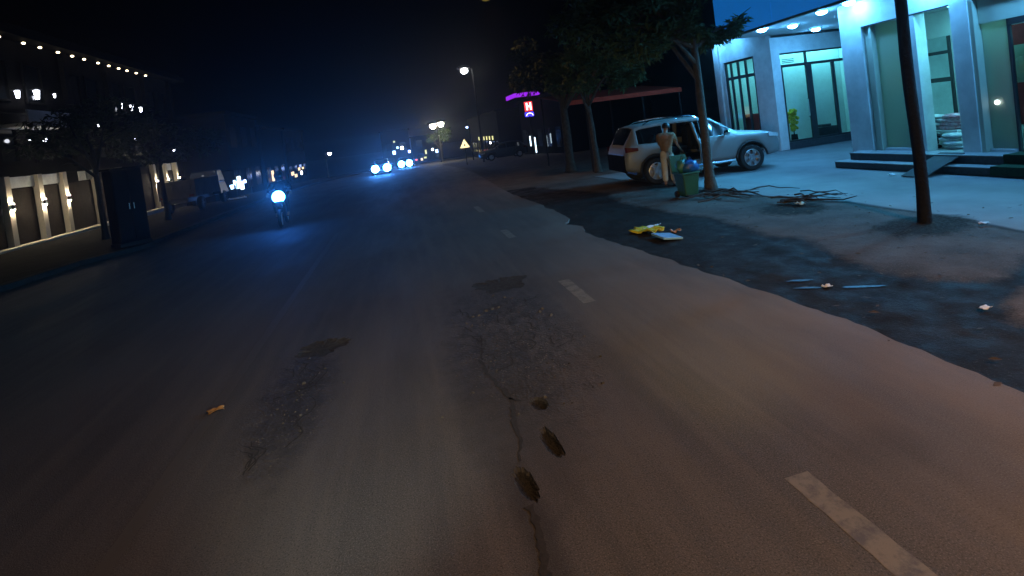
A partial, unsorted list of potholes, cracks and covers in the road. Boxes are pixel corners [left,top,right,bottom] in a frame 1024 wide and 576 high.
pothole [539,426,566,458]
crack [450,294,573,576]
pothole [511,466,540,503]
pothole [529,397,549,410]
pothole [472,275,527,294]
